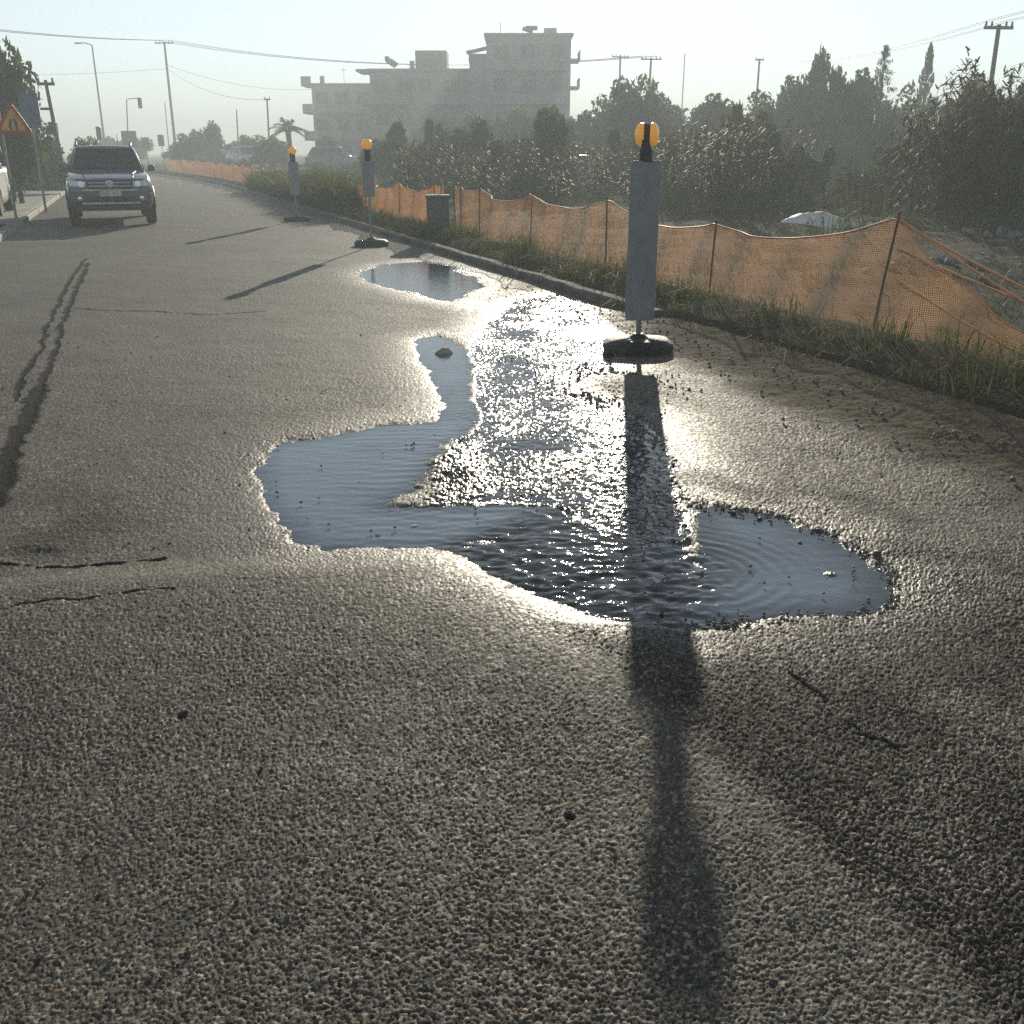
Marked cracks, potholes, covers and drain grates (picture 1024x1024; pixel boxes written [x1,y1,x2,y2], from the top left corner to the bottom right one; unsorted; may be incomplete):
pothole [402,332,492,441]
crack [788,670,830,703]
crack [12,257,265,402]
pothole [439,510,689,637]
crack [851,721,906,755]
crack [0,586,176,610]
pothole [641,496,920,639]
pothole [347,260,498,304]
pothole [237,418,579,557]
